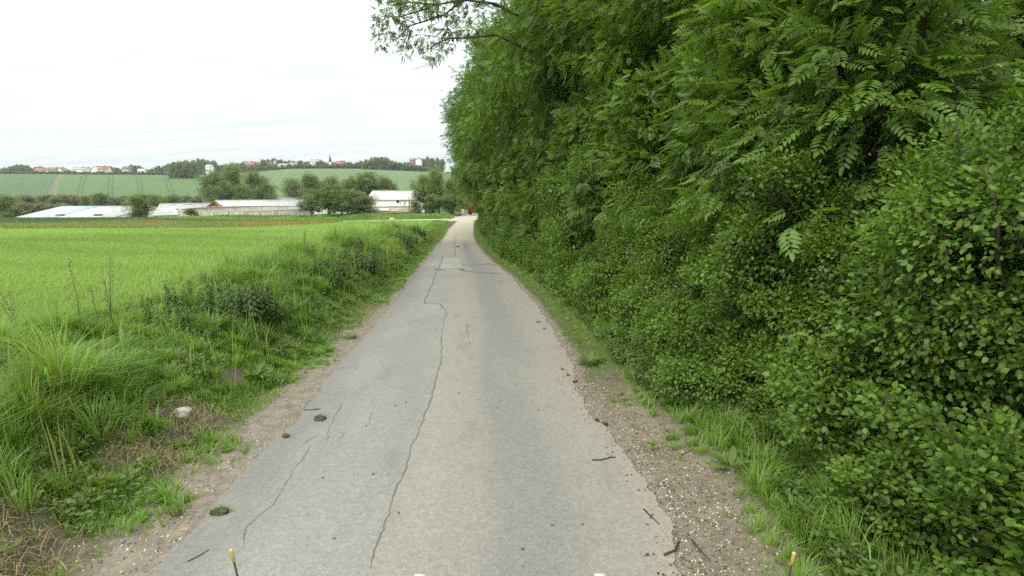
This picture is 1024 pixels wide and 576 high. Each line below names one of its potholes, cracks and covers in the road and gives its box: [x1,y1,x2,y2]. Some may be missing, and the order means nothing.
crack [370,237,500,568]
crack [243,403,342,546]
